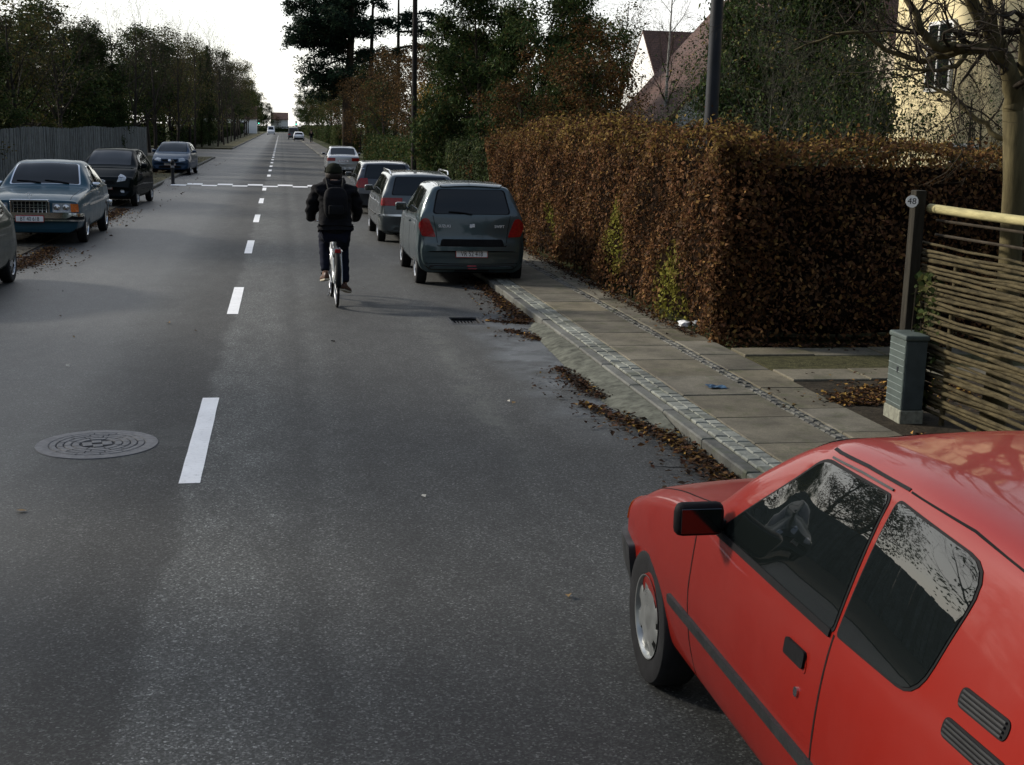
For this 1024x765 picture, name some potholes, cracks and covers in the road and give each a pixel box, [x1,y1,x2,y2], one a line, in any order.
drain grate [445,317,485,325]
manhole cover [34,430,158,459]
